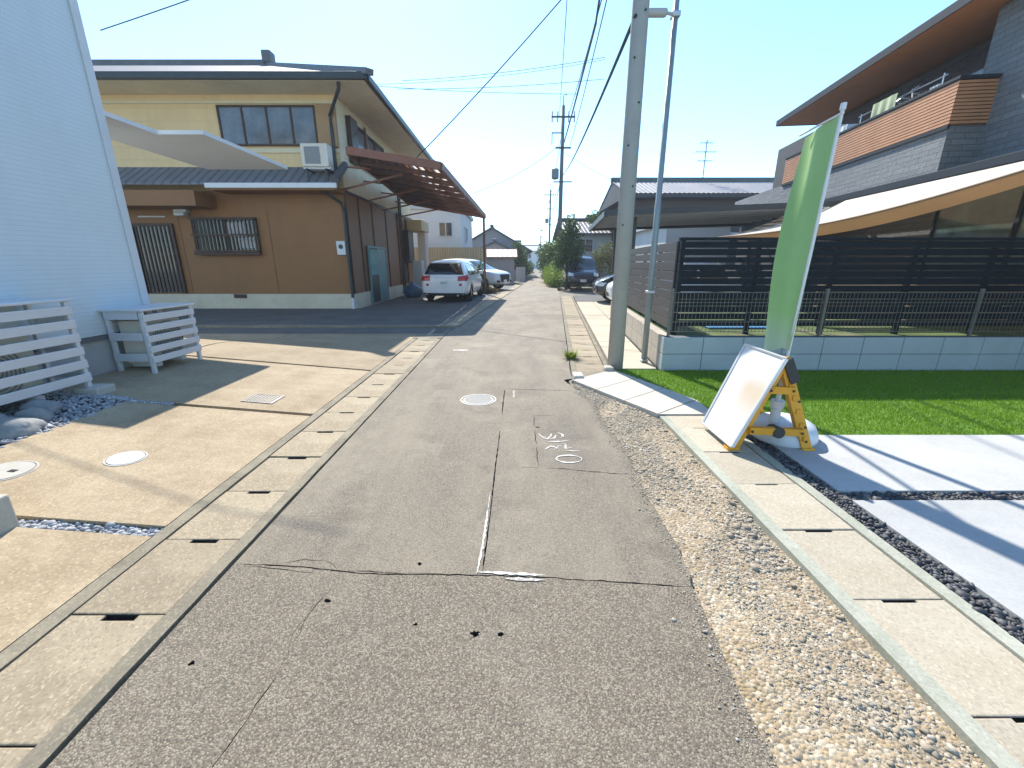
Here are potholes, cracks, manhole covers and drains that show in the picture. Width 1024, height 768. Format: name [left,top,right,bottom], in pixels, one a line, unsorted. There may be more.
manhole cover [460,394,496,406]
crack [212,559,695,768]
drain grate [241,393,285,404]
utility cover [103,451,148,467]
utility cover [0,460,40,481]
